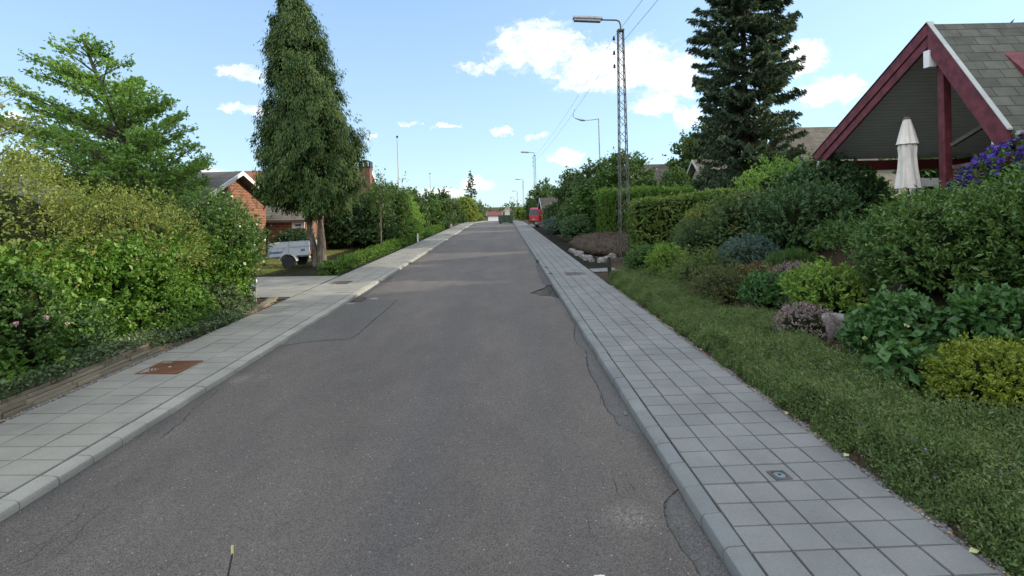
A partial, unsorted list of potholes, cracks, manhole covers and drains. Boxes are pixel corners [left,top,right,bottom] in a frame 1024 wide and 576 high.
manhole cover [135,360,203,374]
crack [574,327,634,433]
utility cover [766,470,793,481]
pothole [531,285,559,298]
crack [14,479,137,563]
